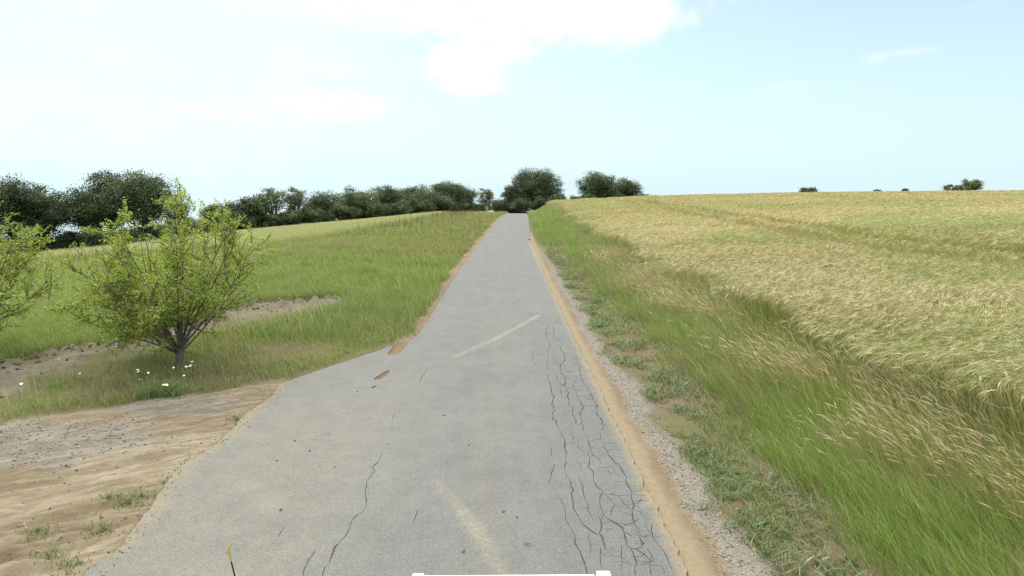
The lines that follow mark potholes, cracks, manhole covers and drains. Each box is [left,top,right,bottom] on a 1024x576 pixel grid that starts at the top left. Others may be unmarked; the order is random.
crack [546,323,671,575]
crack [303,456,381,576]
pothole [388,338,411,355]
